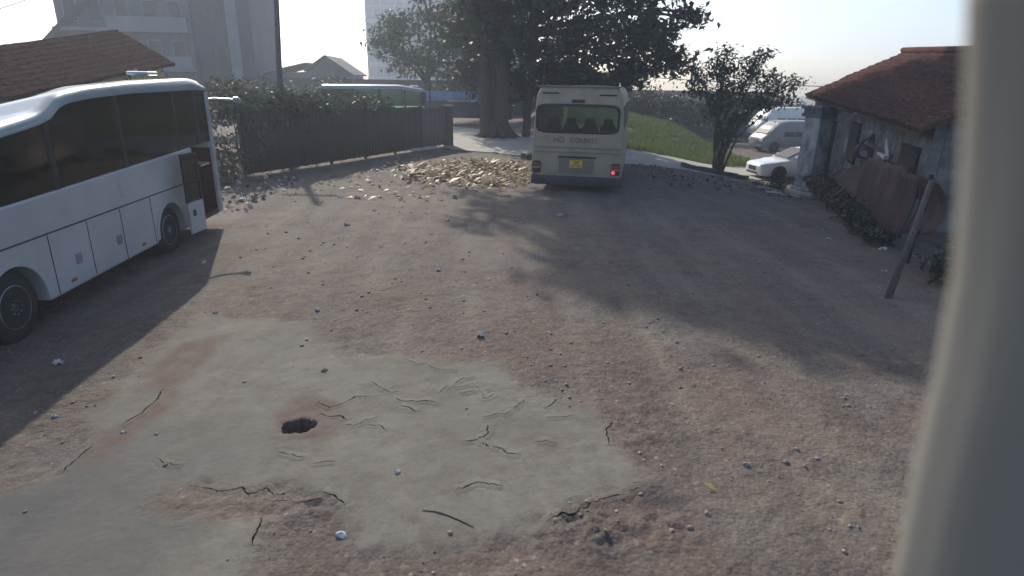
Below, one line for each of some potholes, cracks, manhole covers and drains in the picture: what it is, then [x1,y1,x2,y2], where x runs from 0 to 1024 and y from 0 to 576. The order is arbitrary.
pothole [264,412,333,440]
crack [150,448,352,547]
crack [55,387,171,476]
crack [311,359,667,531]
